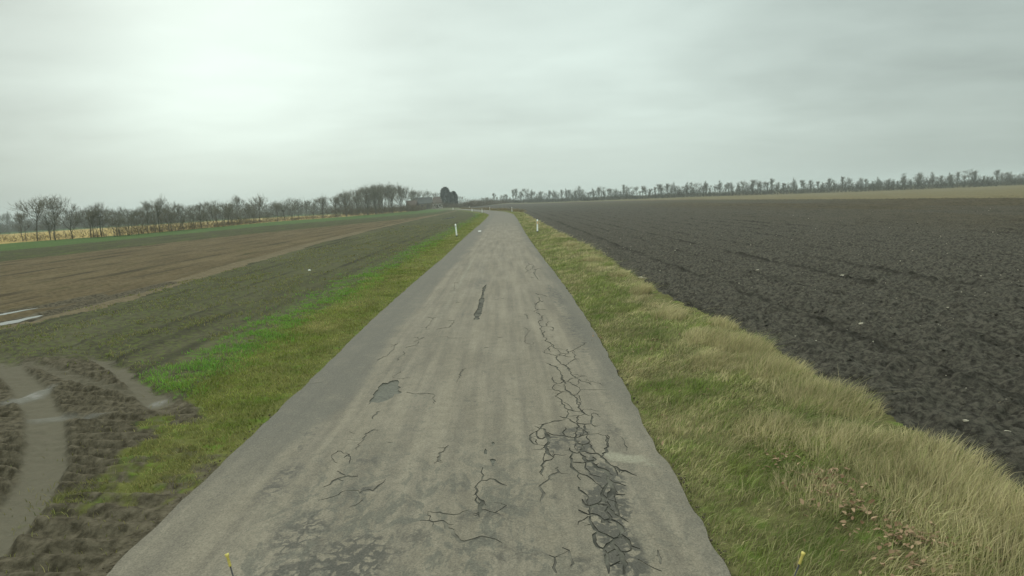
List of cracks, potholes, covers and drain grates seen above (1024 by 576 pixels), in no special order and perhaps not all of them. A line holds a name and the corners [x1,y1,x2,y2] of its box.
crack [420,467,507,544]
crack [321,411,390,507]
pothole [474,285,486,320]
crack [524,293,662,574]
pothole [368,380,401,405]
crack [377,317,455,403]
